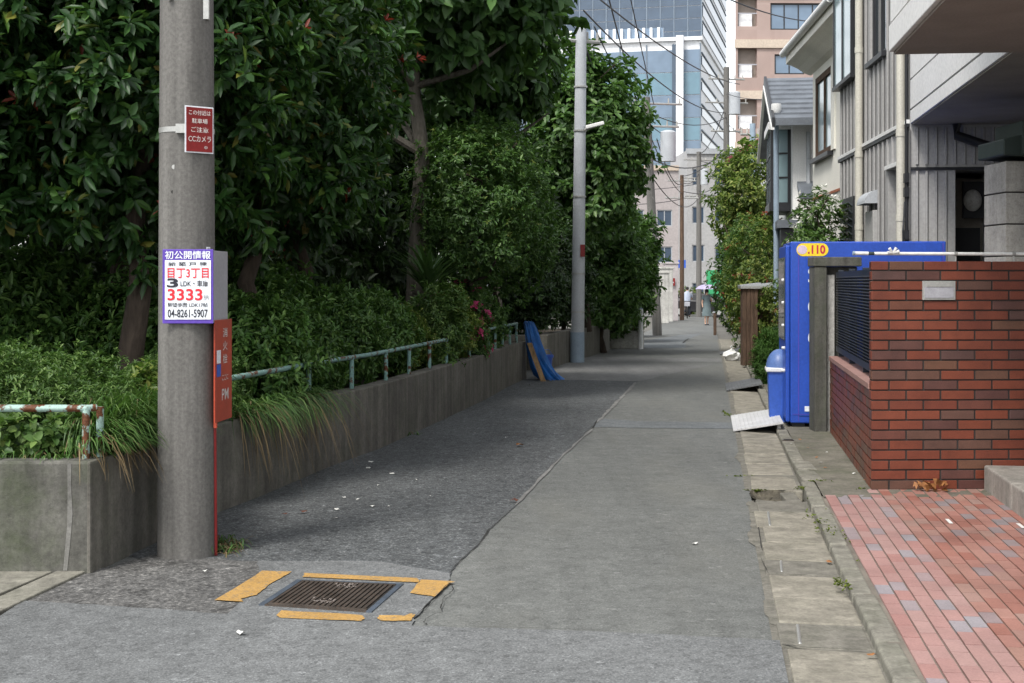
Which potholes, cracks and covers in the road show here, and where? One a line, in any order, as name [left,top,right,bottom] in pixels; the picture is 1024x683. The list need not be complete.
pothole [749,489,785,501]
